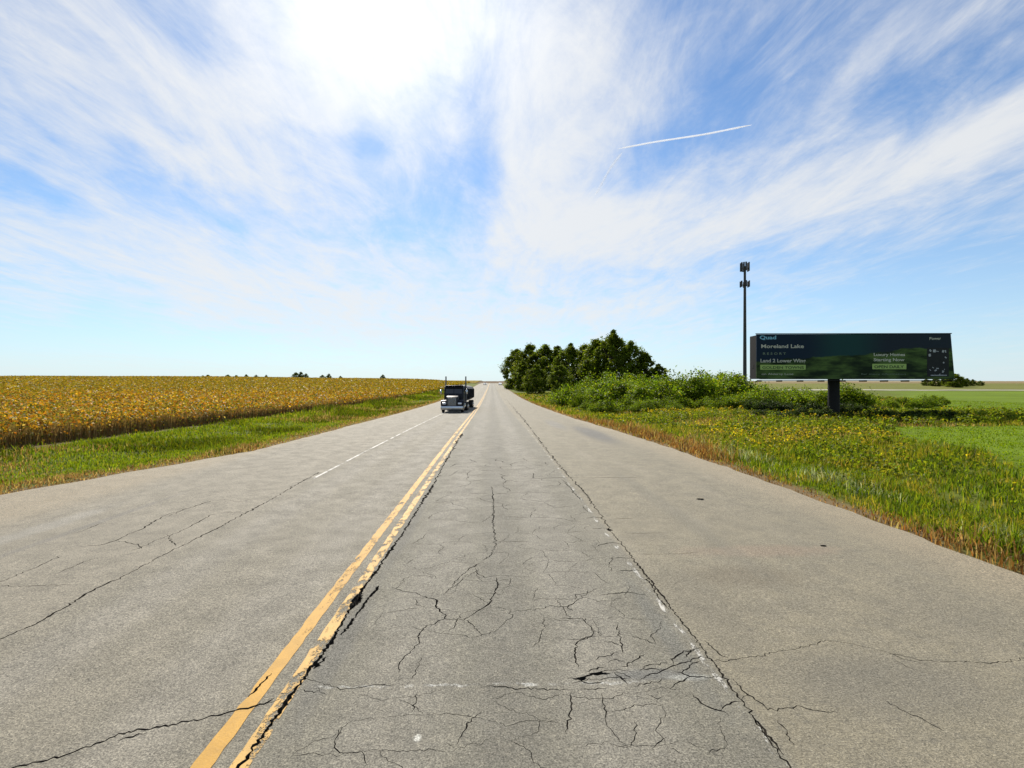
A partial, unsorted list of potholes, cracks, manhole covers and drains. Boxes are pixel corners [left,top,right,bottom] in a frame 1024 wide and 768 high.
crack [295,458,1021,768]
crack [1,473,318,639]
crack [12,676,275,768]
